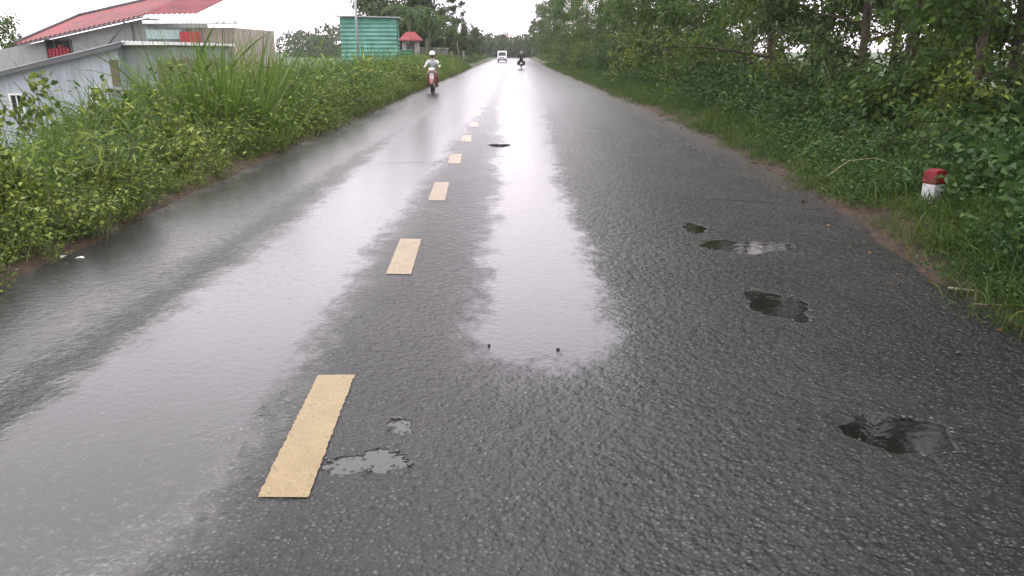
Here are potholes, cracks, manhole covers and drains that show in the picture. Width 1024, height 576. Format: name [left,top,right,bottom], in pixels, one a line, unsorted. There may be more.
pothole [679,221,709,234]
pothole [317,446,414,475]
pothole [740,288,813,323]
pothole [386,416,414,438]
pothole [834,408,967,457]
pothole [694,238,797,254]
